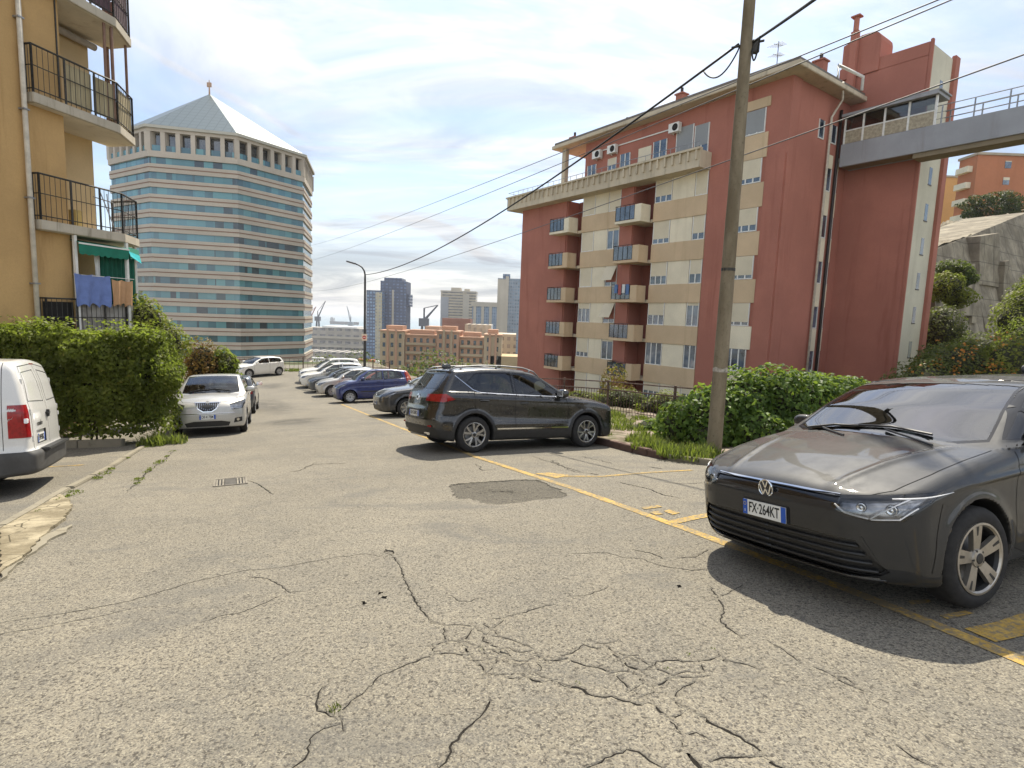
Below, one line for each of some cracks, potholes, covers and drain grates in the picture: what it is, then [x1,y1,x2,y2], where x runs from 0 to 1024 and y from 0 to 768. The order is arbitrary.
crack [201,576,304,623]
crack [248,480,274,495]
crack [285,549,870,768]
